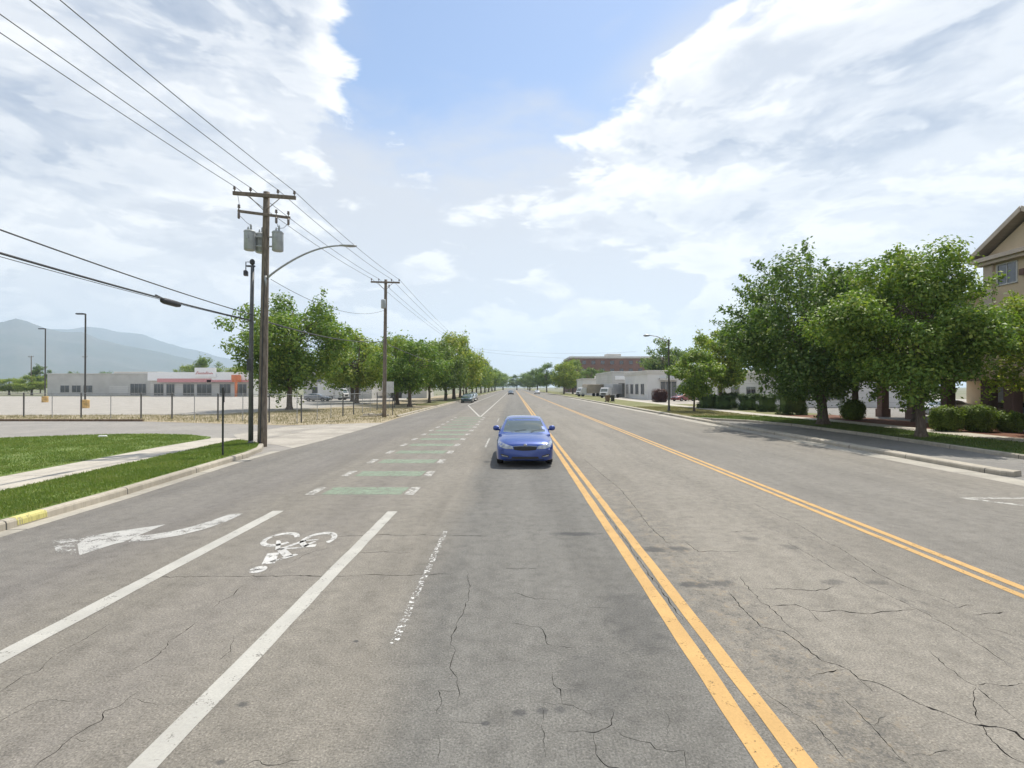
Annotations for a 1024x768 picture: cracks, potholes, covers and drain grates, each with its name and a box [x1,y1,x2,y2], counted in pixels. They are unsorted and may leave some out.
crack [541,672,686,768]
crack [731,505,1024,768]
crack [1,624,109,691]
crack [437,573,470,710]
crack [39,690,161,763]
